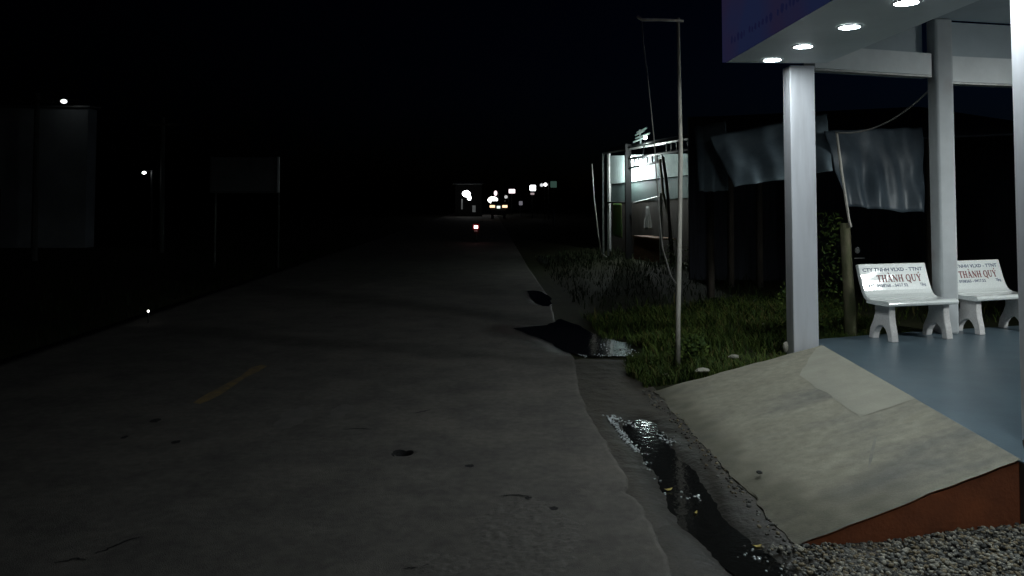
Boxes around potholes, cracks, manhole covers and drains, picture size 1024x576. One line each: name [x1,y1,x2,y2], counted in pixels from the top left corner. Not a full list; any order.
pothole [527,290,552,306]
crack [55,536,140,563]
